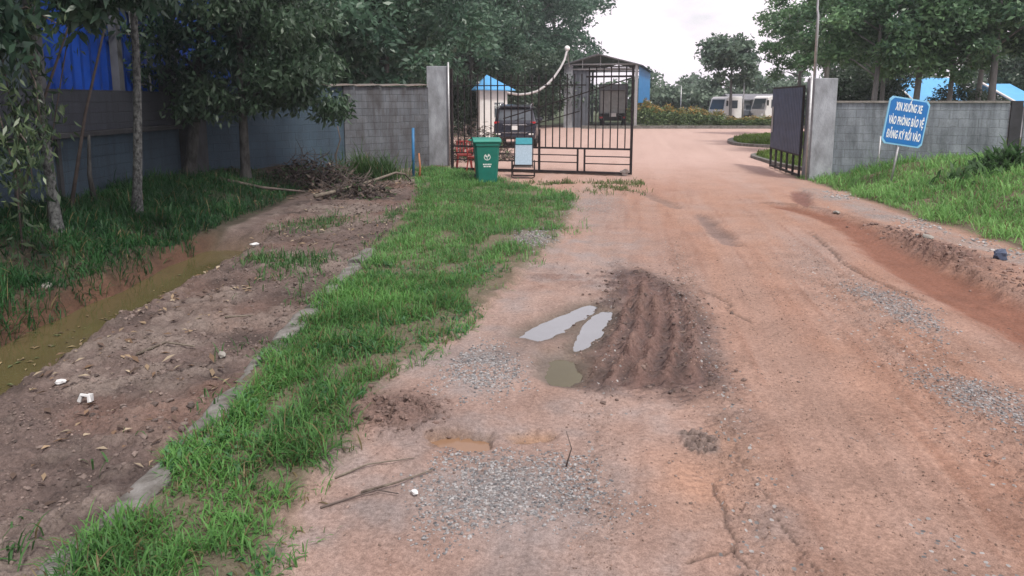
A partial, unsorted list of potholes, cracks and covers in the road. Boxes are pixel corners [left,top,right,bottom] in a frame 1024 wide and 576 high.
pothole [422,424,501,449]
crack [682,451,823,576]
